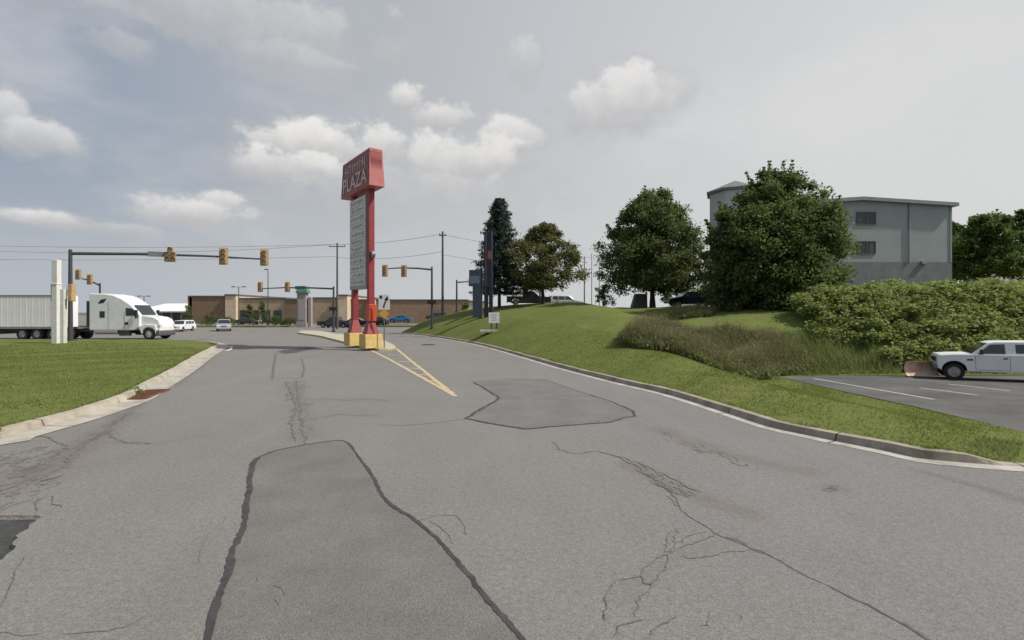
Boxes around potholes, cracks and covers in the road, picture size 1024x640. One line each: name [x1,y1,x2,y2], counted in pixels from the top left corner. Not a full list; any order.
crack [0,413,152,513]
drain grate [127,389,170,400]
crack [552,441,931,640]
crack [662,431,759,469]
crack [270,354,461,444]
crack [405,515,467,543]
